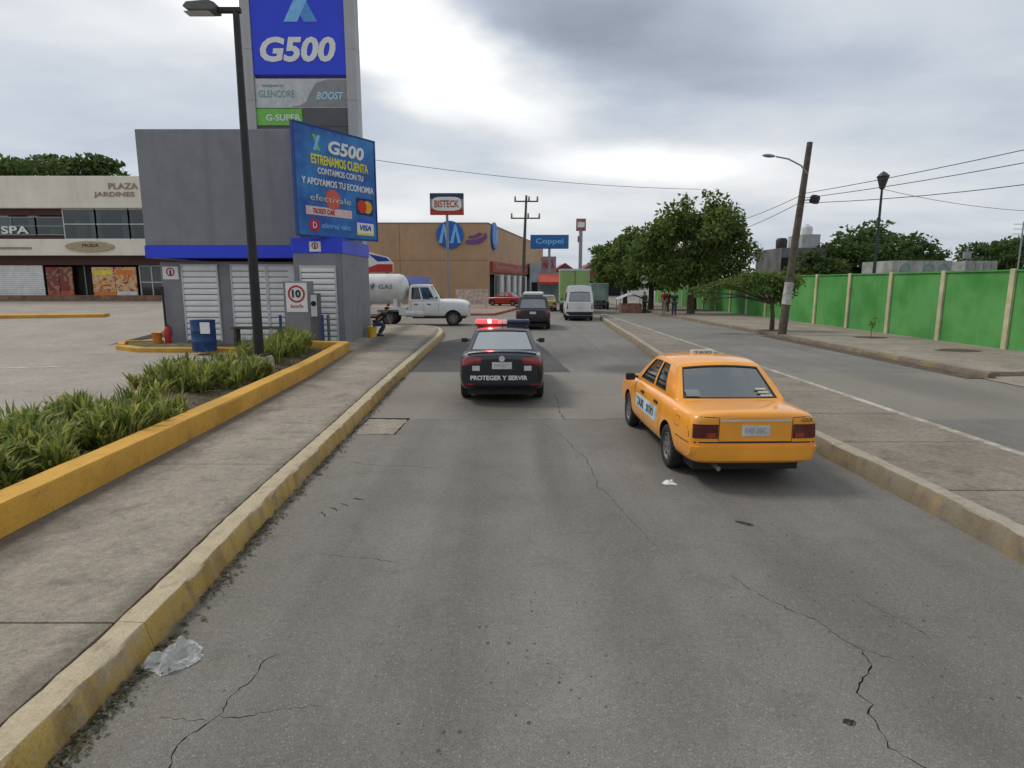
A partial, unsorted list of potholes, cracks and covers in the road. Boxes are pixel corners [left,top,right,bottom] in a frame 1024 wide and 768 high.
crack [542,422,669,562]
crack [732,576,926,768]
manhole cover [349,418,410,435]
crack [159,653,321,768]
